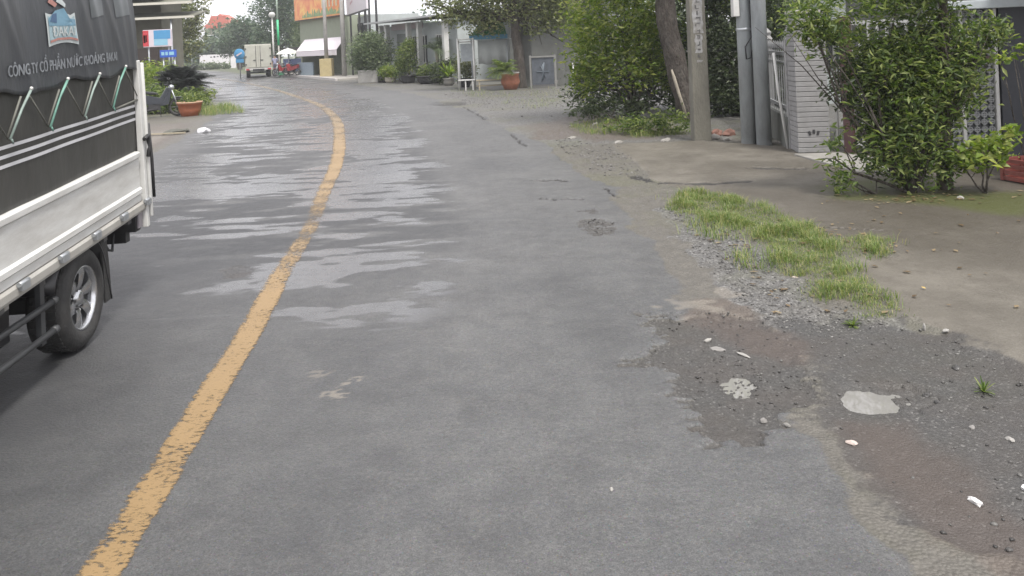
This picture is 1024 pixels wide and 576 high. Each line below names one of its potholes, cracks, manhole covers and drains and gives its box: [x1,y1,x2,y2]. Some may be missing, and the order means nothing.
crack [531,179,584,201]
pothole [578,218,617,236]
crack [604,166,809,198]
pothole [617,310,832,450]
